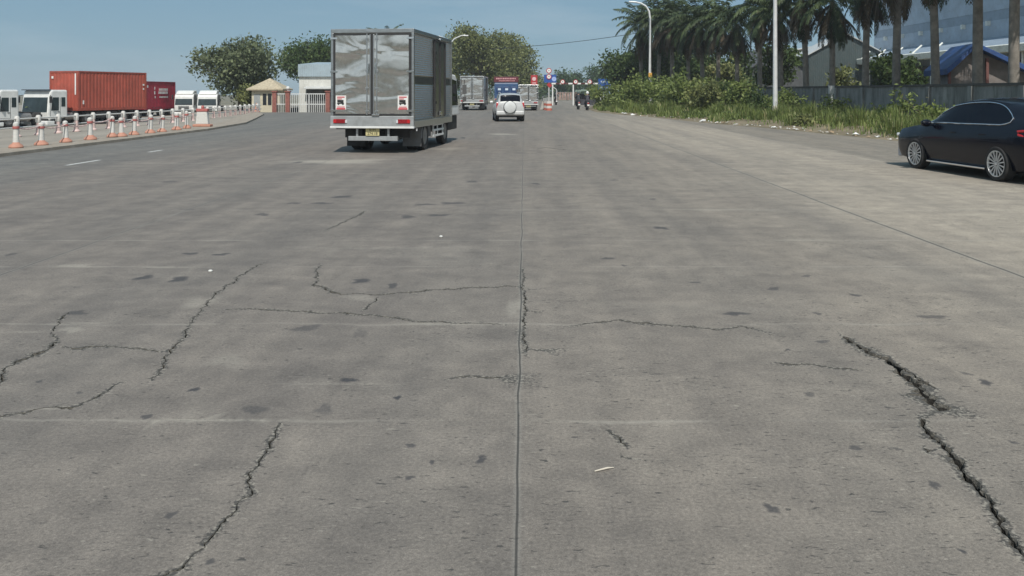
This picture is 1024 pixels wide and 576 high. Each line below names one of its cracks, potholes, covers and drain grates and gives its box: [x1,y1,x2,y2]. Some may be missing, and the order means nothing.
crack [164,423,281,576]
crack [0,266,537,383]
crack [1,385,114,417]
crack [581,320,752,330]
crack [781,337,1024,556]
